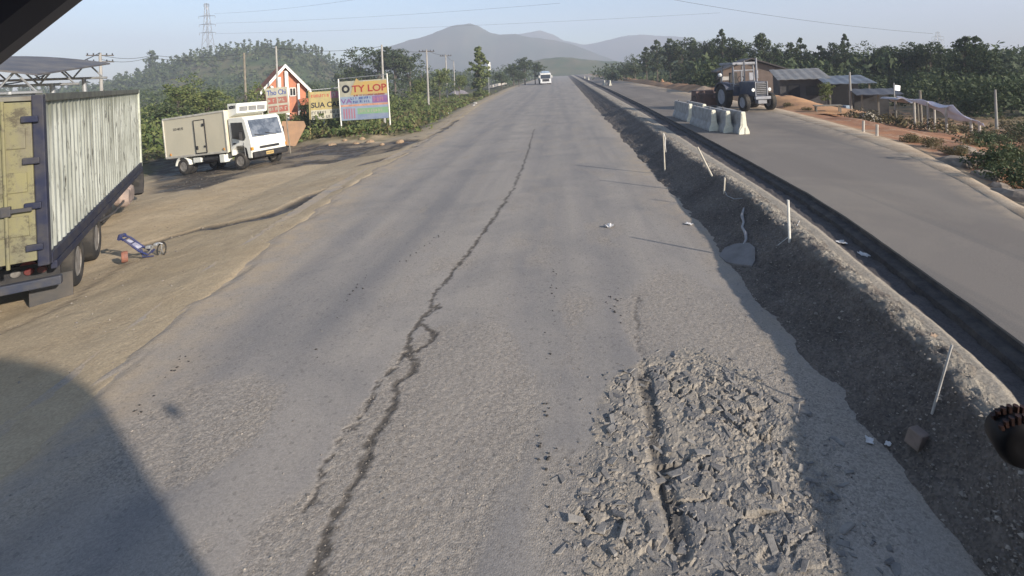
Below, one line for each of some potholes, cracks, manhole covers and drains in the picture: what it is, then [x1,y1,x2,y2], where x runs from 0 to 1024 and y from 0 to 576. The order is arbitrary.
crack [295,129,536,576]
crack [626,294,650,363]
pothole [546,347,901,576]
